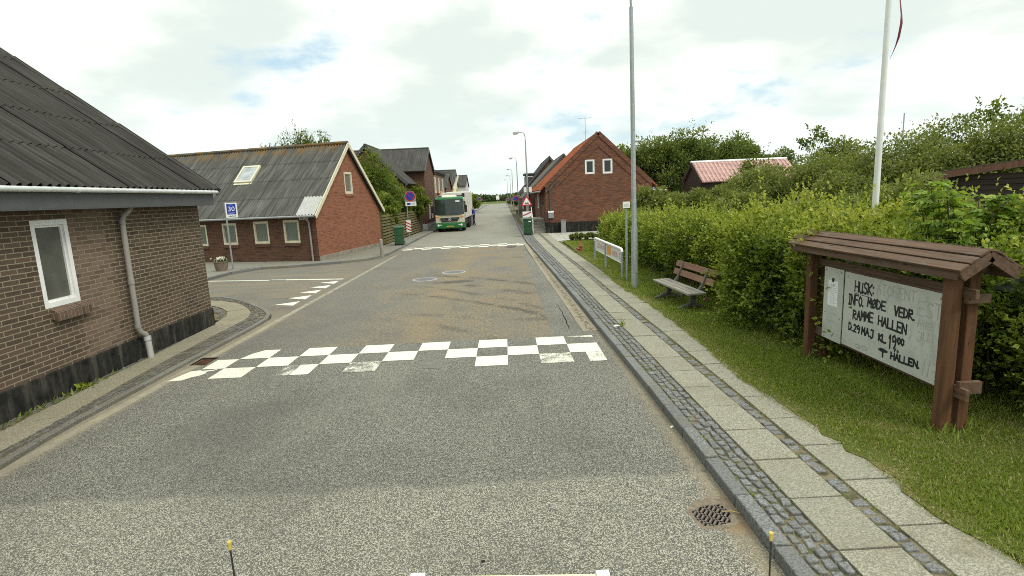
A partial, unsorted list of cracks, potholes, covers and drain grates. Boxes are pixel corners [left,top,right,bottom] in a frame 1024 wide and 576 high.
drain grate [189,357,219,366]
drain grate [686,499,742,529]
